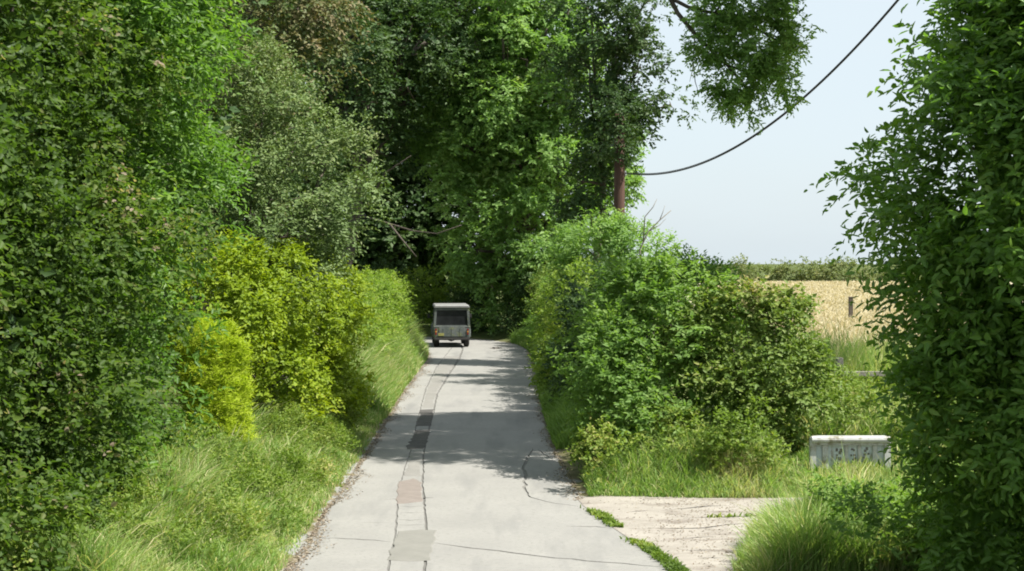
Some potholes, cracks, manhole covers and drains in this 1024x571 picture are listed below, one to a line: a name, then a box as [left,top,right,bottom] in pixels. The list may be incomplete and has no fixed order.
crack [303,346,657,571]
